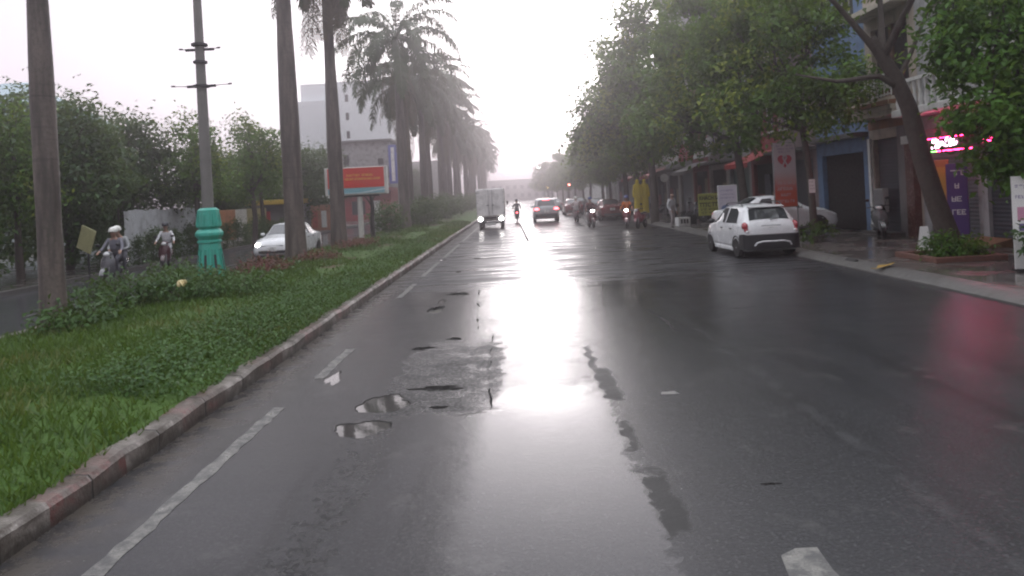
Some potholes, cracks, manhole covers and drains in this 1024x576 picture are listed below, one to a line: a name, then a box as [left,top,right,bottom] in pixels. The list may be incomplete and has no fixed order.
pothole [333,420,392,438]
pothole [355,394,411,413]
crack [457,290,494,416]
